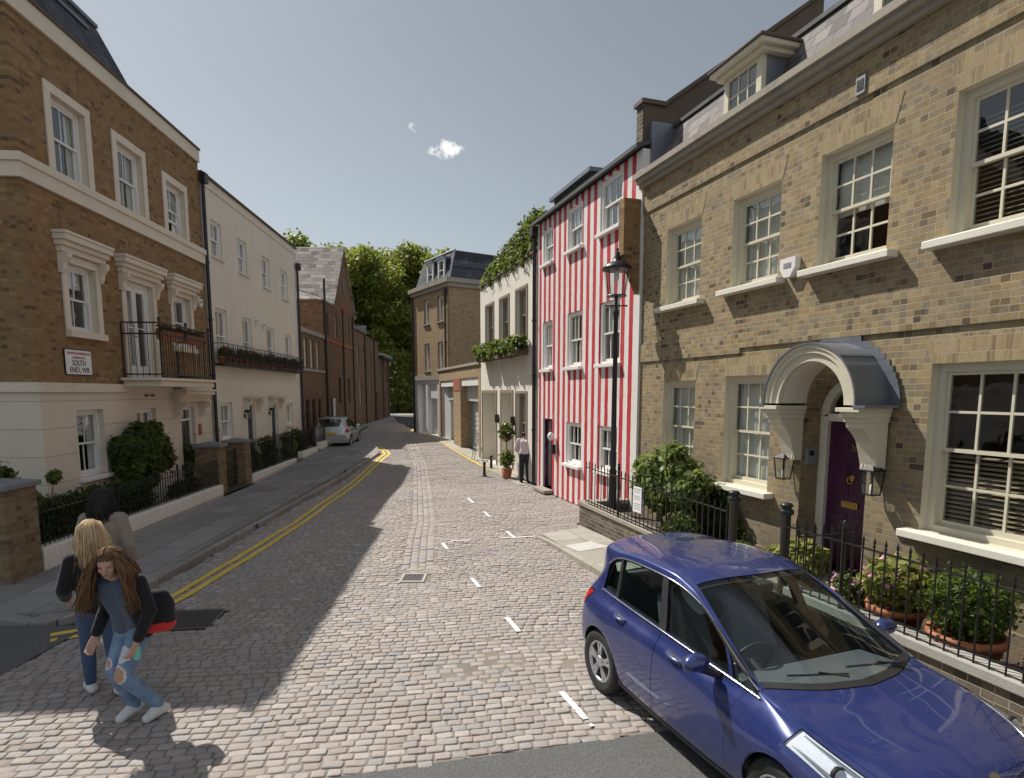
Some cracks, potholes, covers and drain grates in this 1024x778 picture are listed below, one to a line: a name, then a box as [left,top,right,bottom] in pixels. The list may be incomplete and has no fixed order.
drain grate [165,609,226,632]
